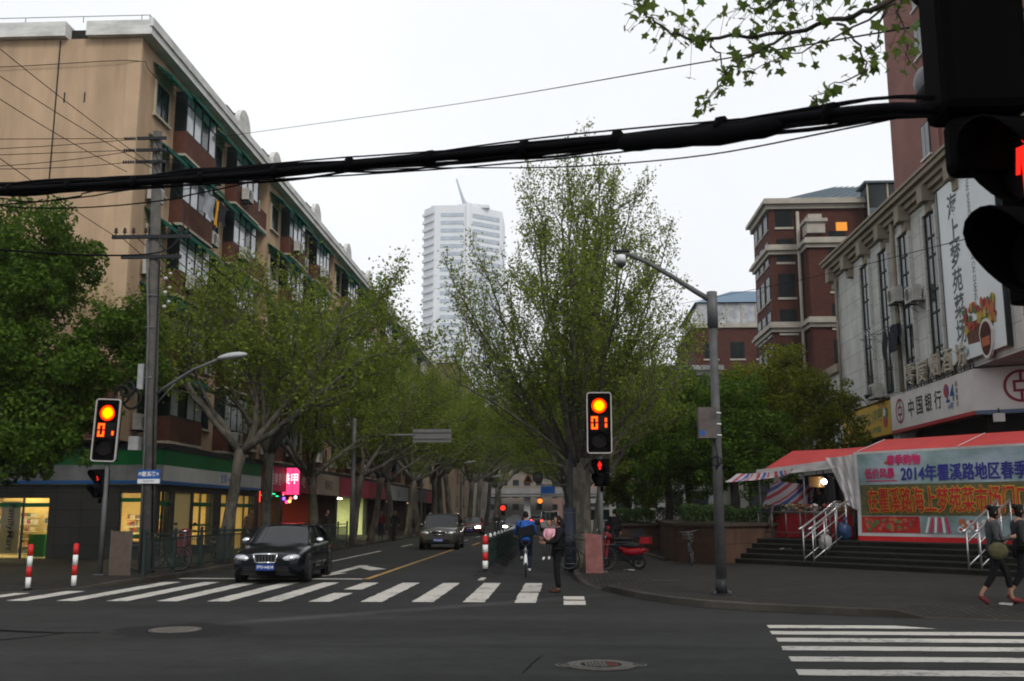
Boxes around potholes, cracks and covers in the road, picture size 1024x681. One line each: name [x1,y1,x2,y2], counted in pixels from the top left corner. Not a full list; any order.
manhole cover [555,659,647,671]
